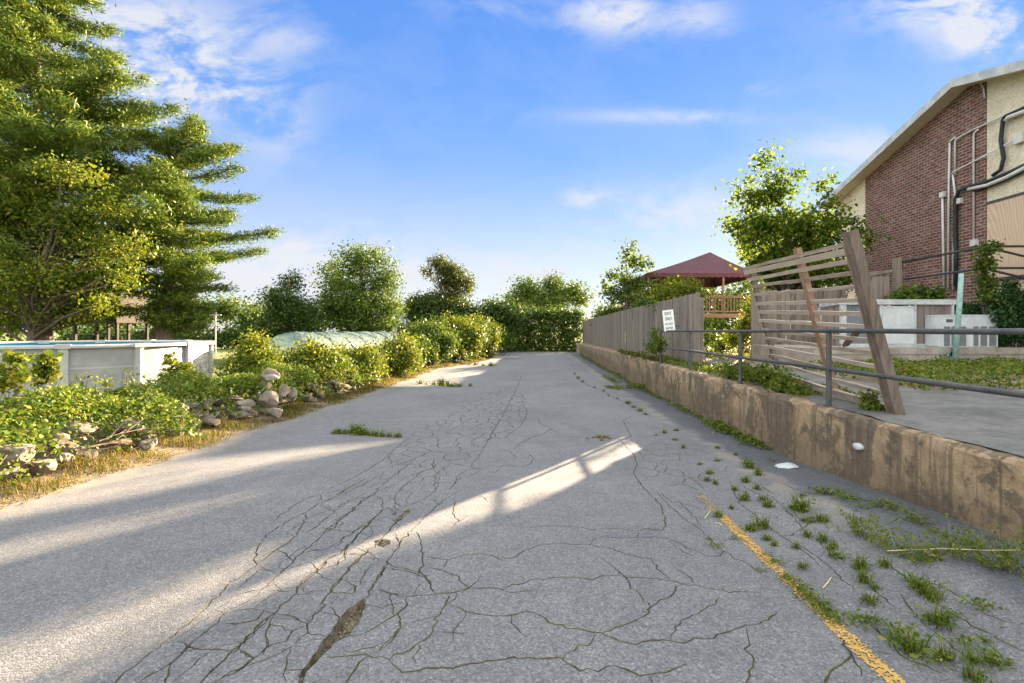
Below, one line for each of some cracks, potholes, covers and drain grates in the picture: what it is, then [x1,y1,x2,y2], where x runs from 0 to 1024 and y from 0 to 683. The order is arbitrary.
pothole [297,599,369,683]
crack [106,390,777,683]
